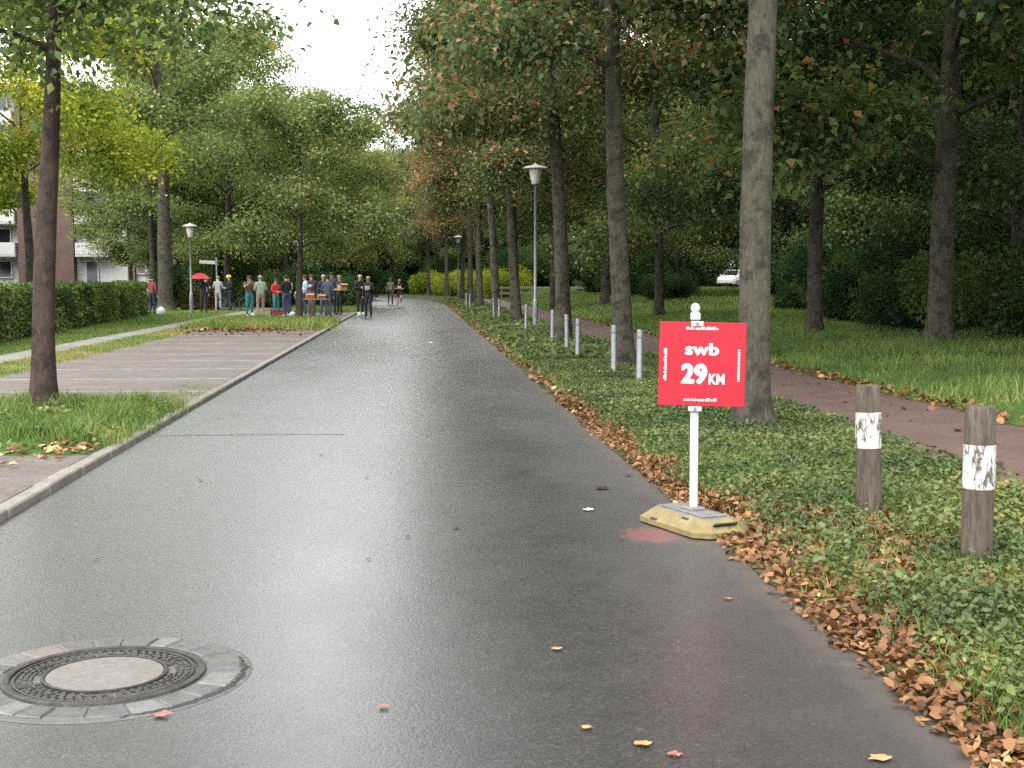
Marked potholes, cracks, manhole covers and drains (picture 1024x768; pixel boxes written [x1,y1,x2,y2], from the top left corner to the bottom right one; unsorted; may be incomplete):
manhole cover [0,637,253,725]
